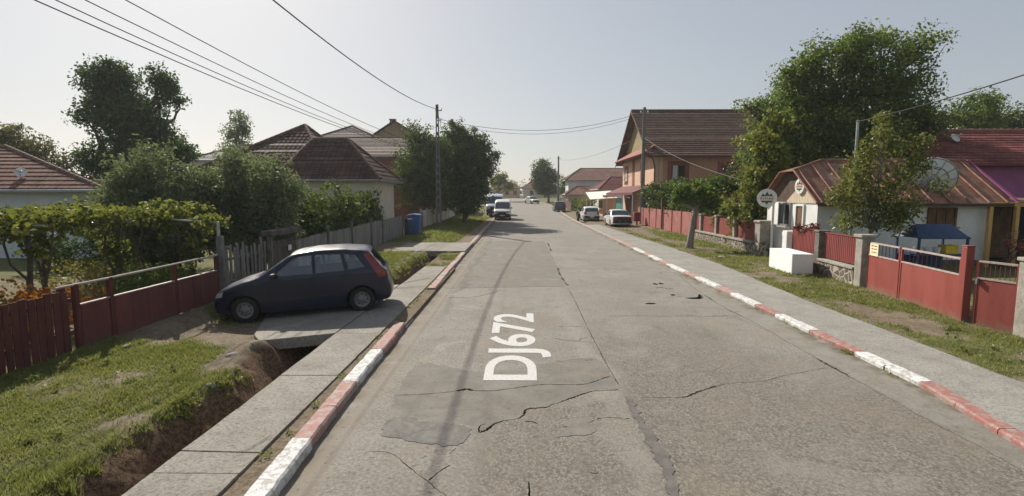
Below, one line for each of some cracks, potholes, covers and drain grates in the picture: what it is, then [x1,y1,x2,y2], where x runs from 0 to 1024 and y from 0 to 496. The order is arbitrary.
crack [395,376,629,433]
crack [641,368,823,398]
crack [370,451,446,496]
